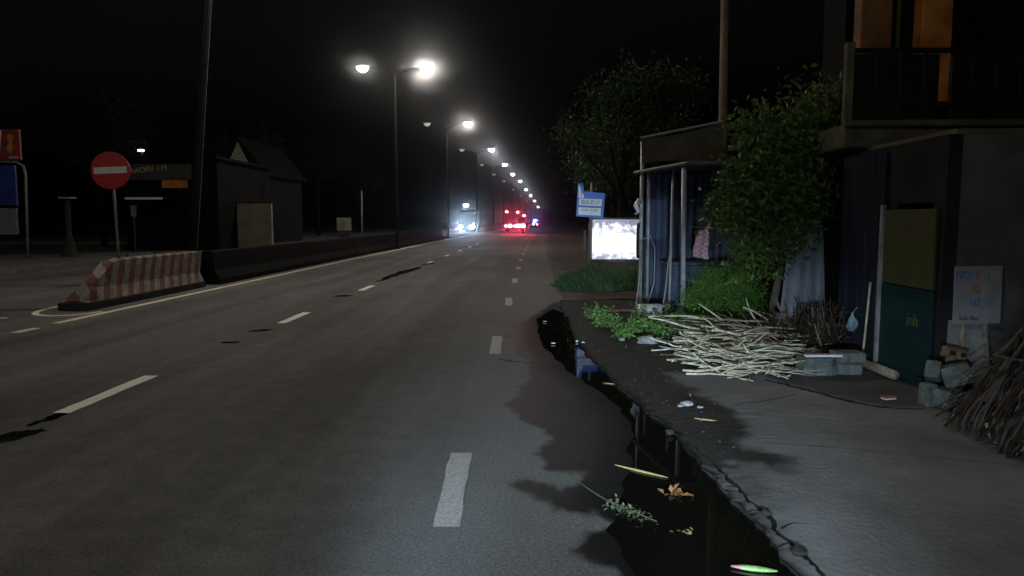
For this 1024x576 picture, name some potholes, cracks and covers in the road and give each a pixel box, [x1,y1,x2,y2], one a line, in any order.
crack [694,445,826,576]
crack [726,379,925,409]
pothole [0,428,47,443]
pothole [26,413,67,426]
pothole [375,267,422,282]
